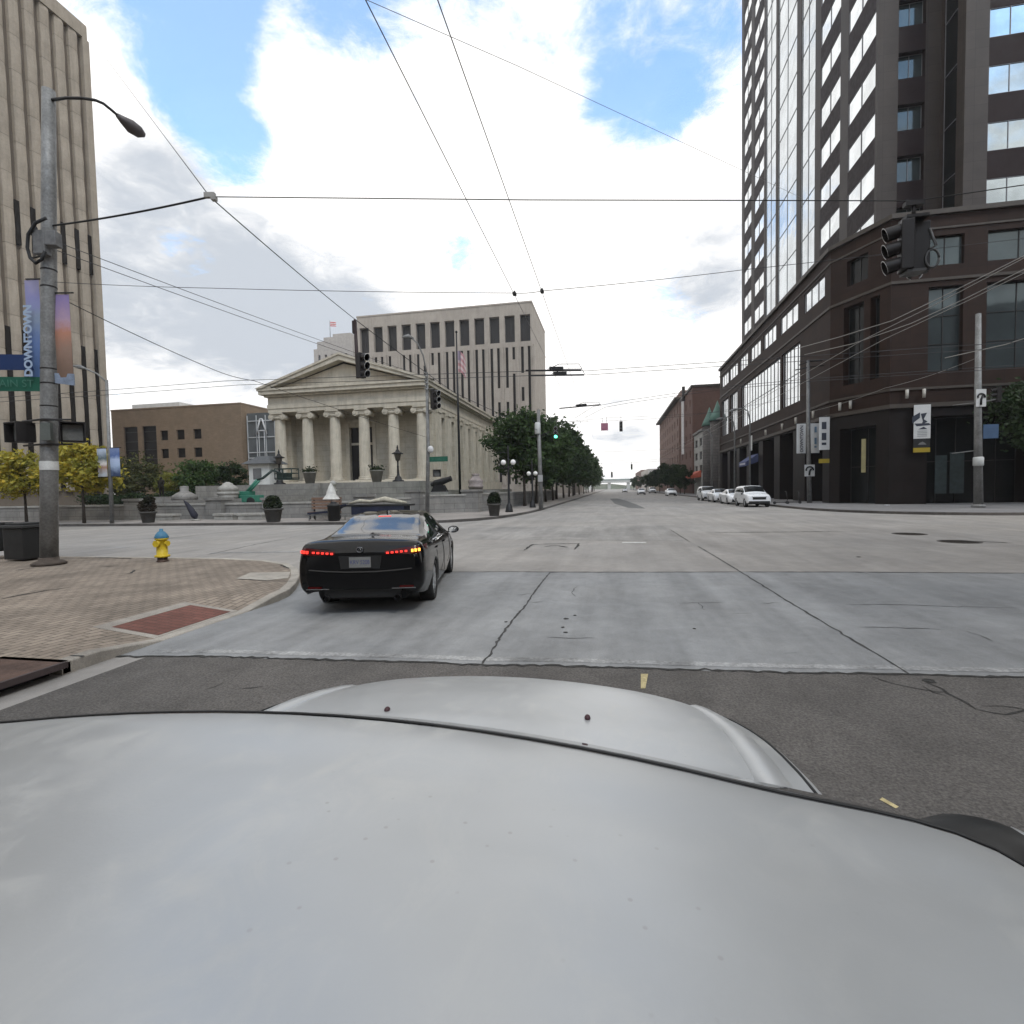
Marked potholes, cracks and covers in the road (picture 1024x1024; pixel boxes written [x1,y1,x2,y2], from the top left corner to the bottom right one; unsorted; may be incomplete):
crack [853,676,1024,721]
